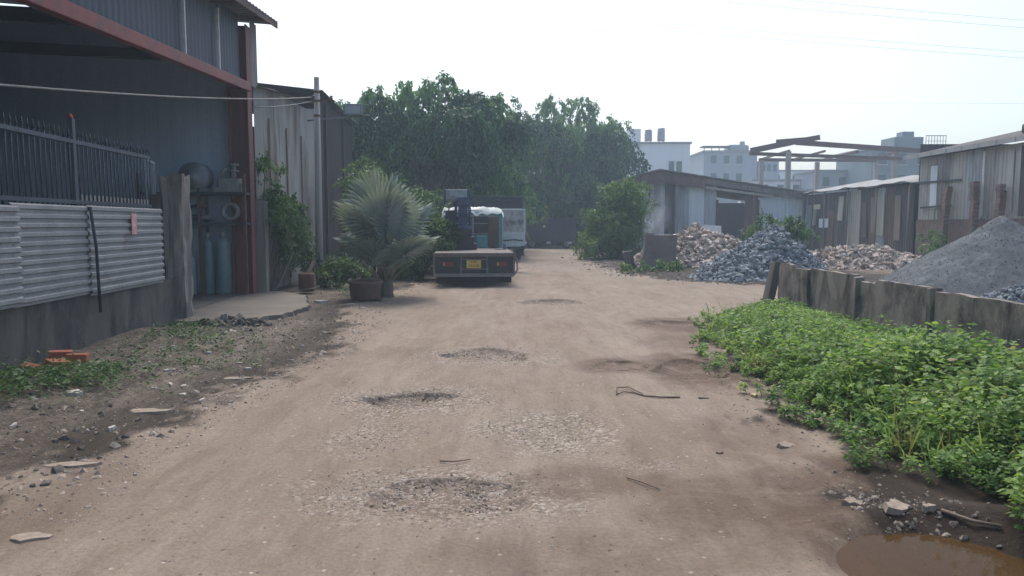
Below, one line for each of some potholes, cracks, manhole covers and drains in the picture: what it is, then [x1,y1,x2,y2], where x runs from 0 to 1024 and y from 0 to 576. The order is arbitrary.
pothole [433,347,532,363]
pothole [640,320,698,328]
pothole [592,361,651,371]
pothole [350,476,542,520]
pothole [646,358,736,382]
pothole [348,391,465,409]
